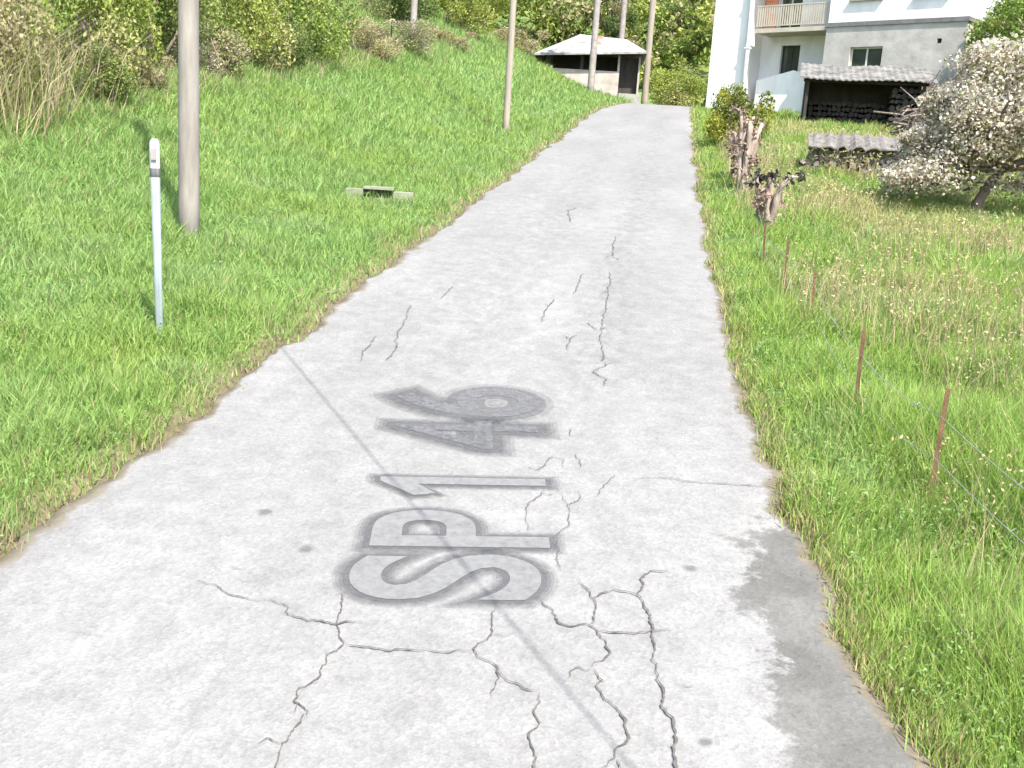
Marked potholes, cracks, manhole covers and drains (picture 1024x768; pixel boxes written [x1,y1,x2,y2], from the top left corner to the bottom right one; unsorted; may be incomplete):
crack [257,594,541,768]
crack [361,306,411,359]
crack [525,490,581,565]
crack [541,570,686,768]
crack [566,236,619,385]
